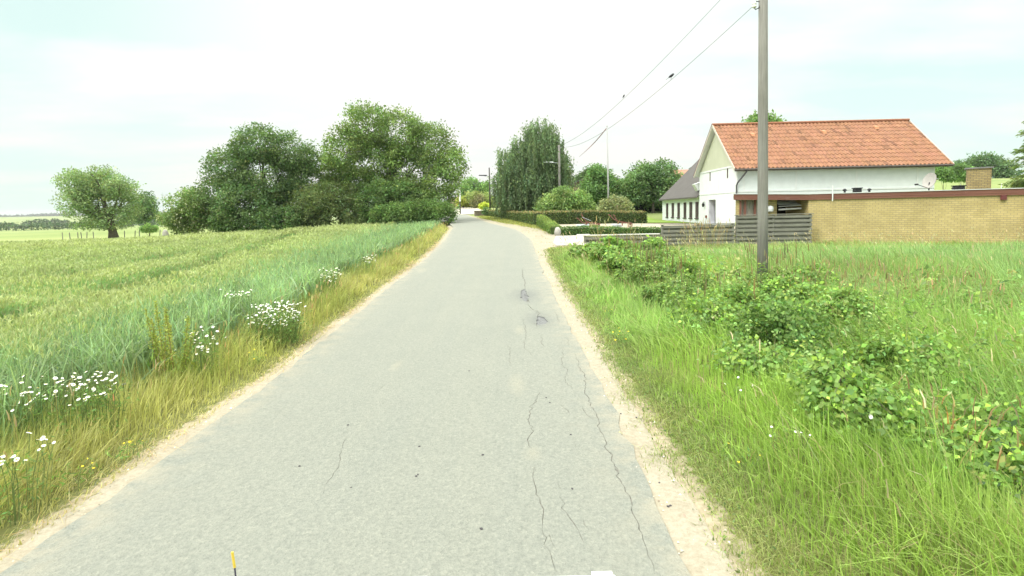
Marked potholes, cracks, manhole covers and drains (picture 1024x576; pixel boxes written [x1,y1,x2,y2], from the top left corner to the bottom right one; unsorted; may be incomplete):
crack [509,270,558,362]
crack [561,337,654,566]
crack [533,467,586,568]
